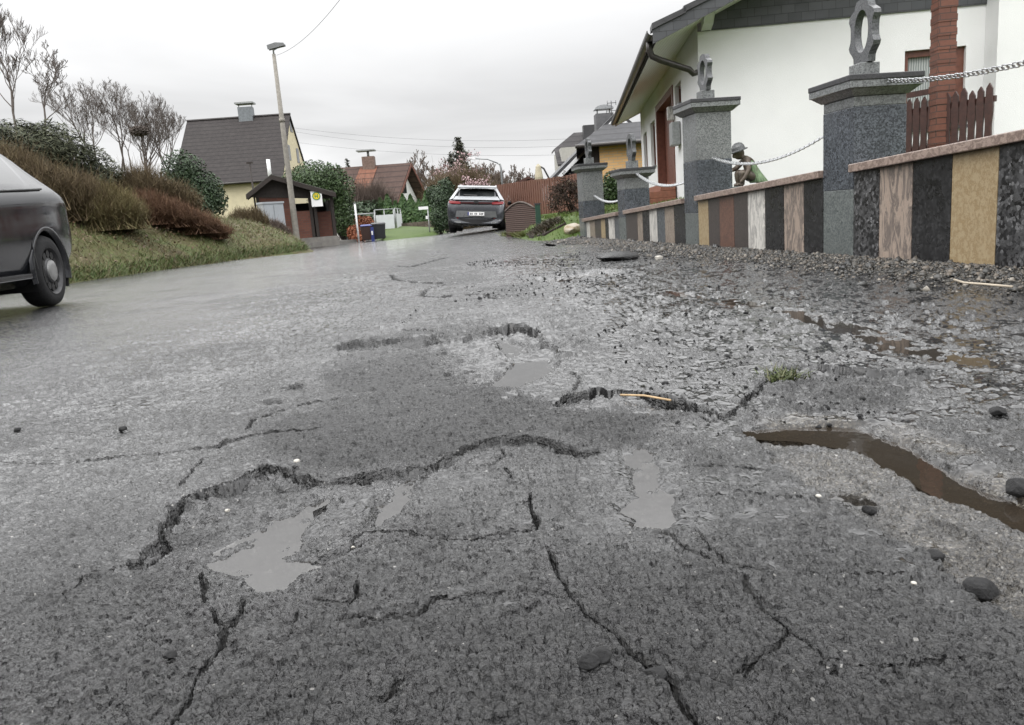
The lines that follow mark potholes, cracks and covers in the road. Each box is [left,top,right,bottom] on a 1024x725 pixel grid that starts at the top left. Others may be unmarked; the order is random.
crack [171,465,701,725]
crack [554,363,928,423]
crack [2,394,344,486]
pothole [326,328,444,352]
crack [644,526,975,677]
pothole [125,463,423,595]
pothole [436,320,564,389]
pothole [729,420,1024,534]
